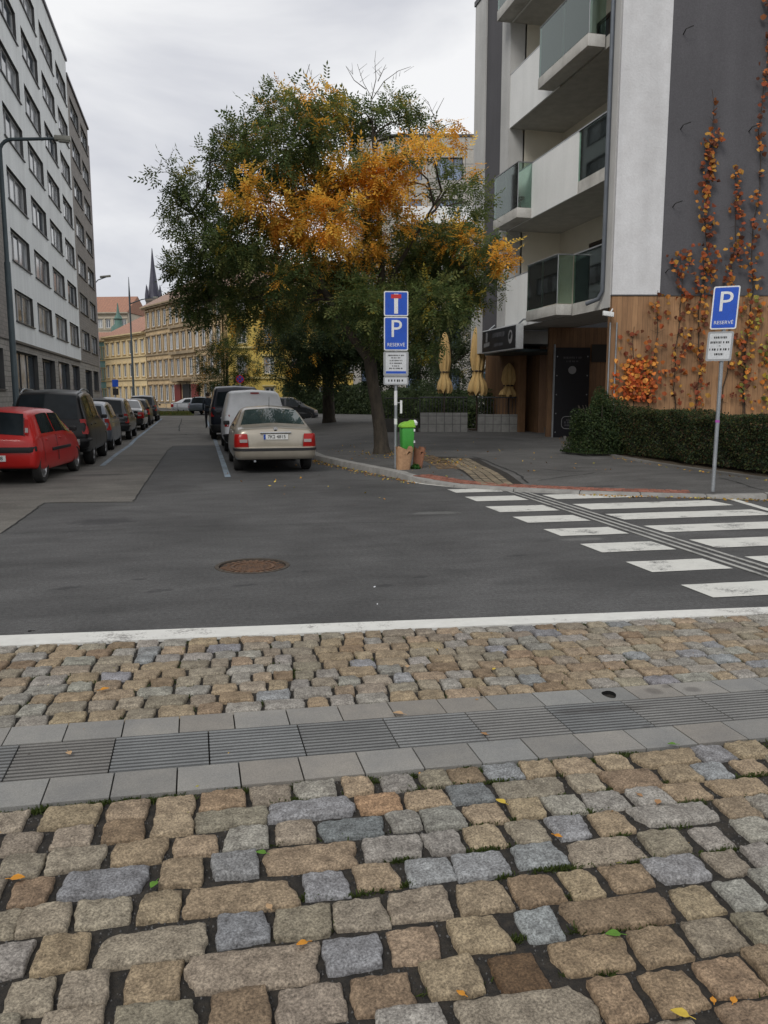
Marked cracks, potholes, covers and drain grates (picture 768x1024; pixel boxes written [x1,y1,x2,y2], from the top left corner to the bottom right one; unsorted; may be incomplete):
manhole cover [215,558,290,574]
